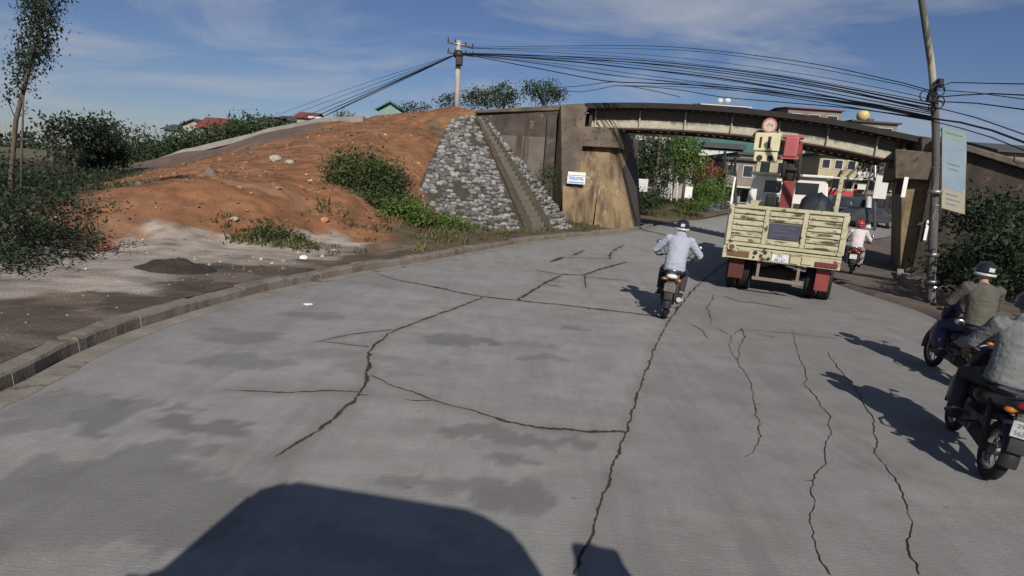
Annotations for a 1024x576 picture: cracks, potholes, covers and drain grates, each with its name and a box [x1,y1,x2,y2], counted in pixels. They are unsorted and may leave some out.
crack [826,350,920,574]
crack [226,245,837,575]
